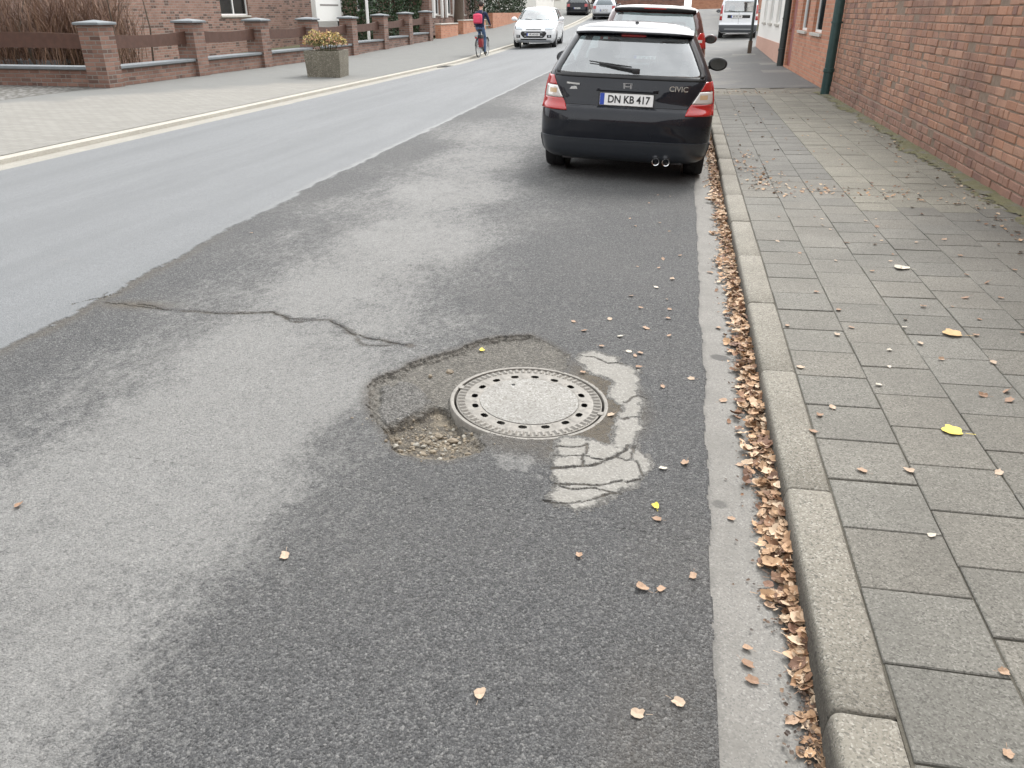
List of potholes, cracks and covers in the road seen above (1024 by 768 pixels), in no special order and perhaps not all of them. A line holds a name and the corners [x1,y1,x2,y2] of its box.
crack [542,443,645,504]
manhole cover [450,367,608,440]
crack [71,292,406,346]
pothole [367,334,571,461]
